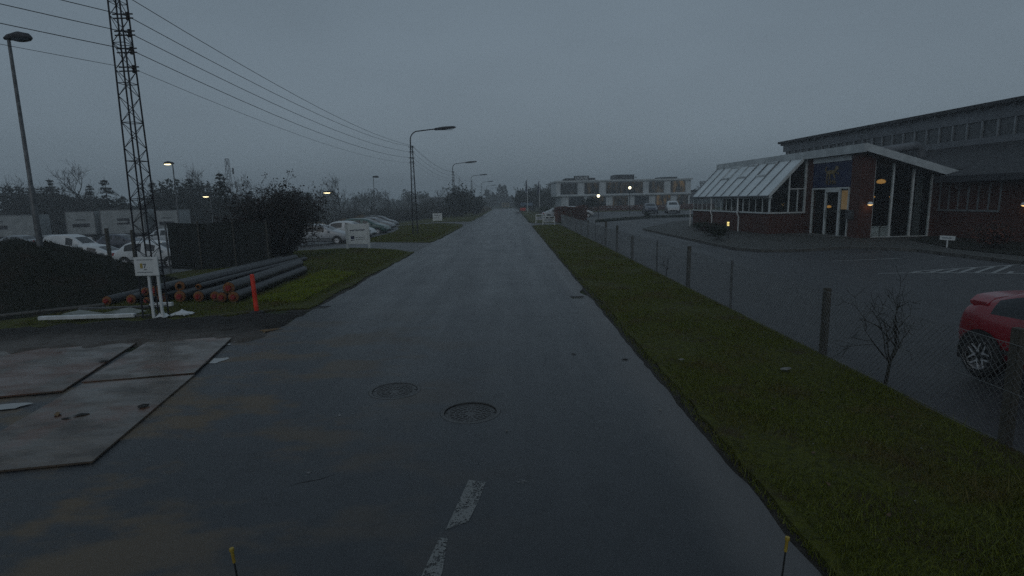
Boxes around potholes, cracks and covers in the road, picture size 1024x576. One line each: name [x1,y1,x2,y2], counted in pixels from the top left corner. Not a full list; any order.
manhole cover [440,401,500,424]
manhole cover [369,382,421,400]
